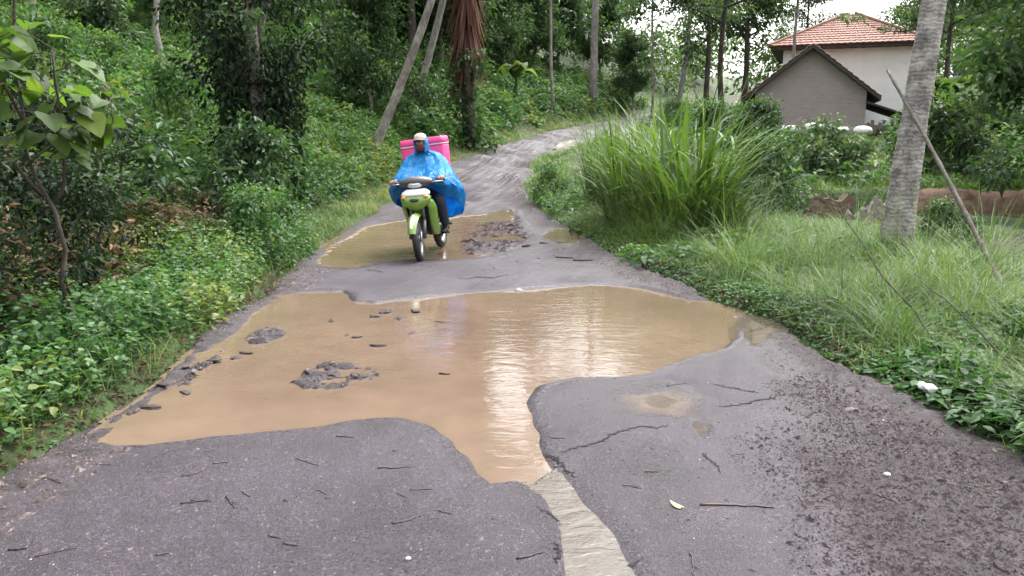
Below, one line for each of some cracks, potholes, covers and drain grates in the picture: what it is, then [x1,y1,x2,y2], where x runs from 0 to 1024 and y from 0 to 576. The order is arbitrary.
pothole [82,283,745,486]
crack [542,424,668,477]
pothole [539,227,587,244]
pothole [728,311,790,347]
pothole [305,210,540,269]
